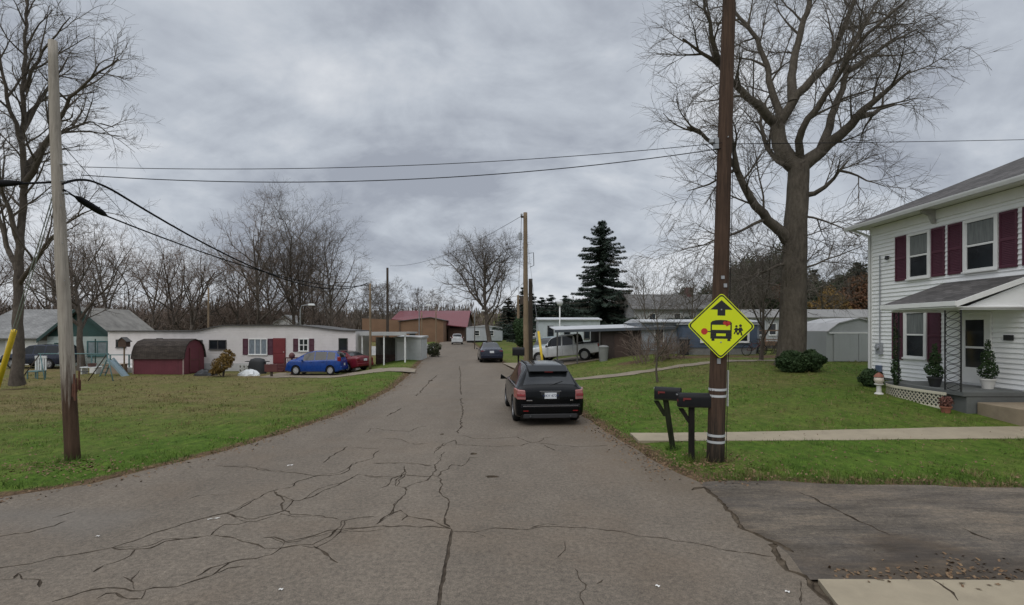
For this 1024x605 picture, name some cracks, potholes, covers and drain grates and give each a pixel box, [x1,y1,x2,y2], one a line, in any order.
crack [0,372,773,605]
crack [802,493,890,535]
